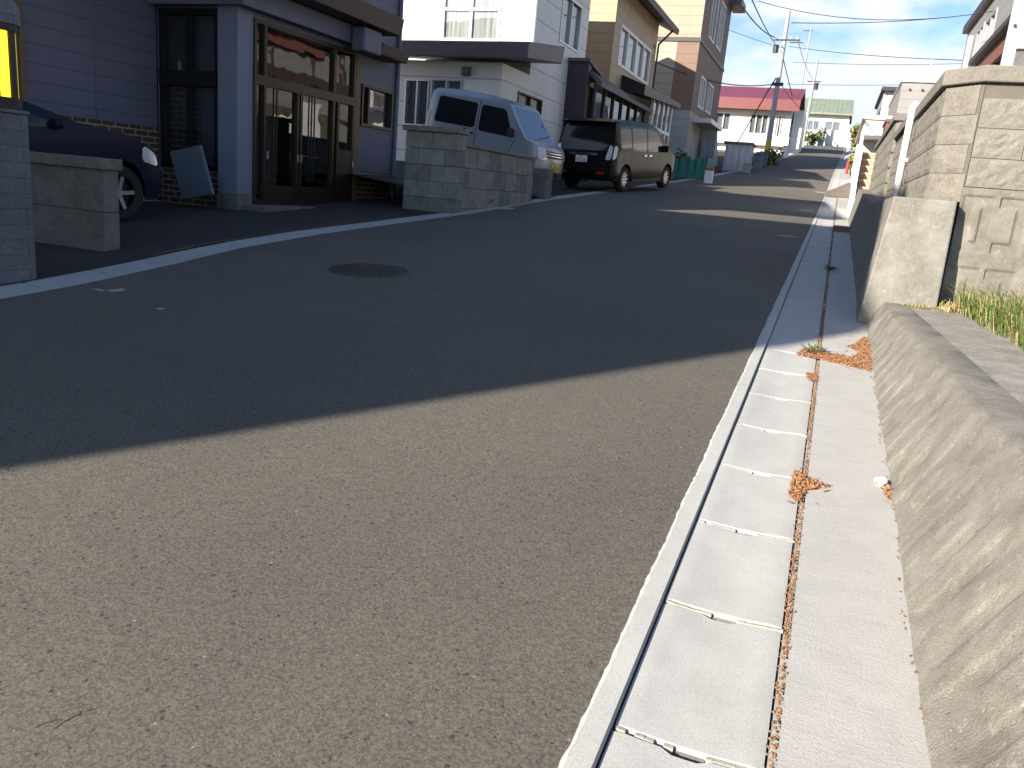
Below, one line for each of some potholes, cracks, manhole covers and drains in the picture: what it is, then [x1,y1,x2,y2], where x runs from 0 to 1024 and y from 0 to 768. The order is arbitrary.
manhole cover [328,263,410,277]
crack [35,705,107,730]
